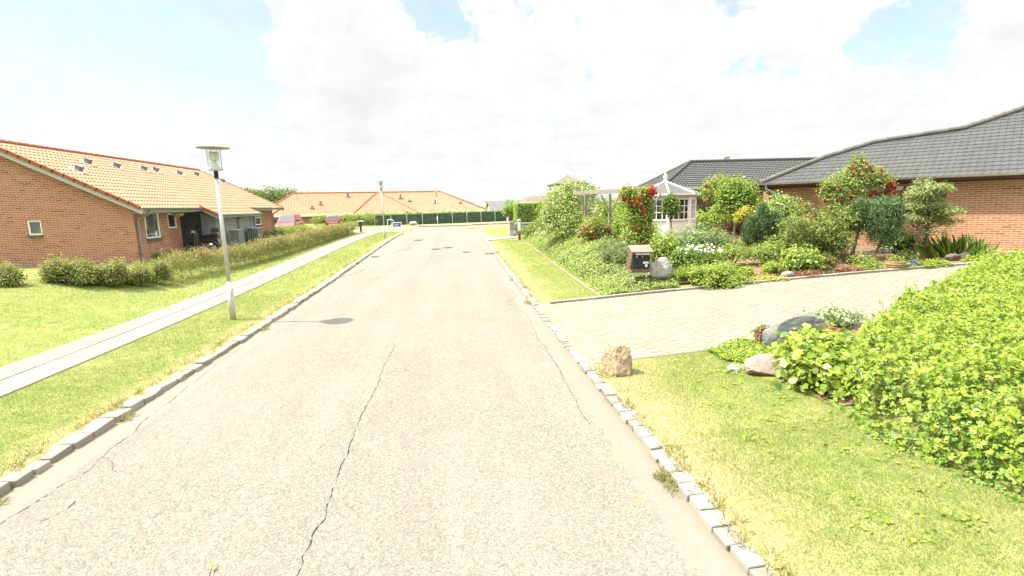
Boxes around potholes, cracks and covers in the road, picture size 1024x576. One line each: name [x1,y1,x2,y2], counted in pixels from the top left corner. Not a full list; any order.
crack [297,343,403,575]
crack [508,290,588,421]
